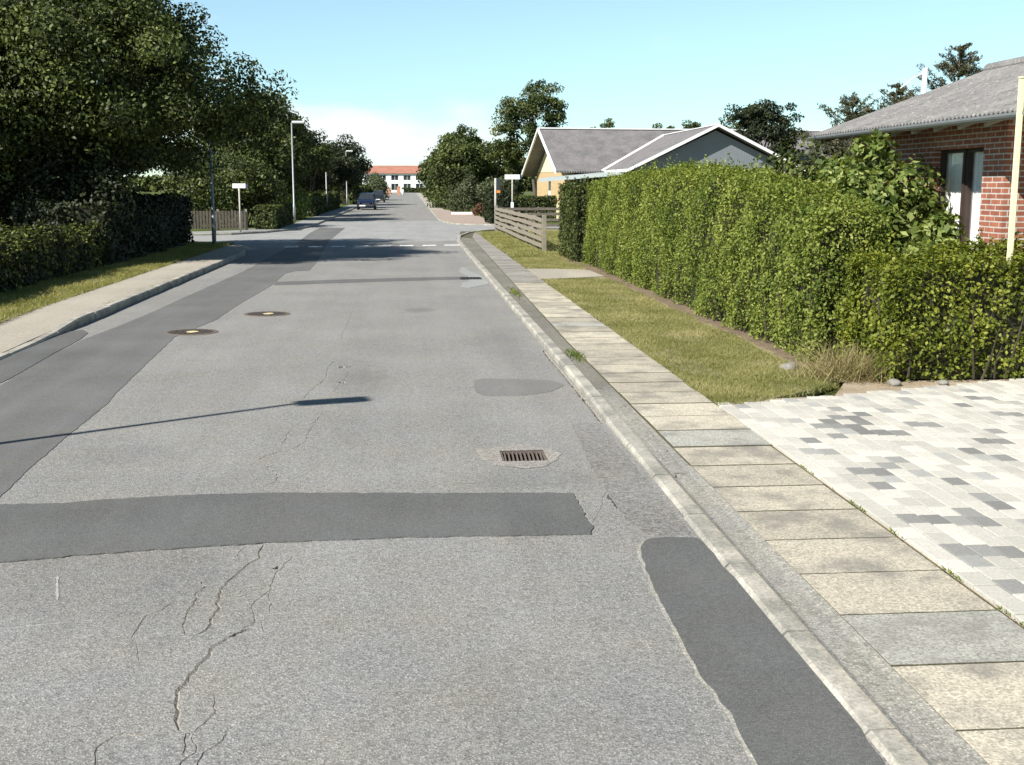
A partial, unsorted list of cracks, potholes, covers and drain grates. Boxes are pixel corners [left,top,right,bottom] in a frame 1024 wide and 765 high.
crack [304,362,348,398]
crack [259,417,319,484]
crack [94,546,291,765]
crack [592,492,618,523]
drain grate [500,450,548,461]
